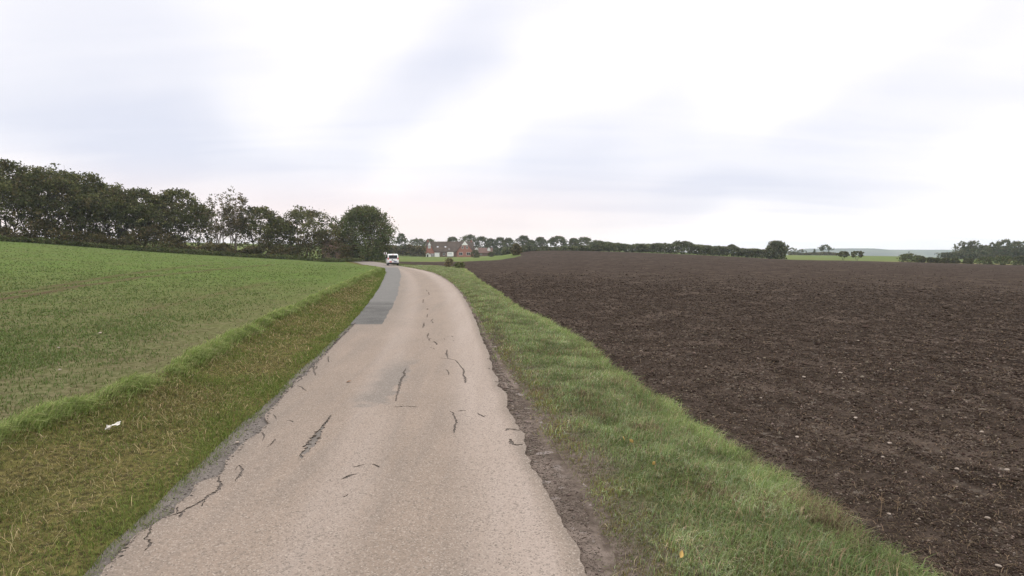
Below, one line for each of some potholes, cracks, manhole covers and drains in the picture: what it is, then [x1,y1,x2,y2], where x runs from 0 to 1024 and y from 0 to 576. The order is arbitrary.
crack [423,292,466,383]
crack [256,415,331,459]
crack [176,465,244,517]
